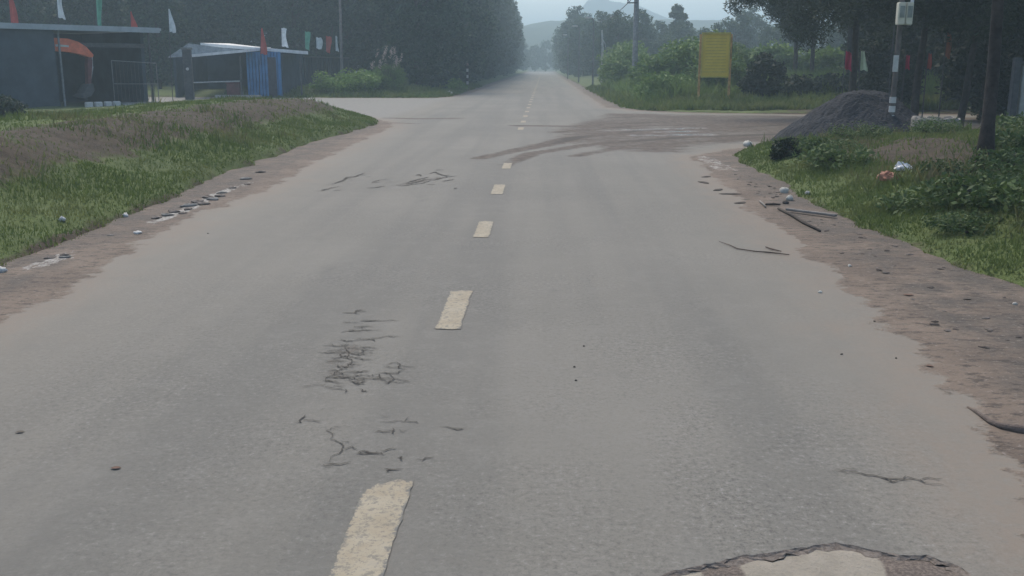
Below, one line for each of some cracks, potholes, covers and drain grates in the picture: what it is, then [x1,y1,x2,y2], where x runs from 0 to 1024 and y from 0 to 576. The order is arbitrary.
crack [322,172,457,191]
pothole [662,542,971,576]
crack [307,309,412,392]
crack [295,409,418,472]
crack [840,468,944,485]
